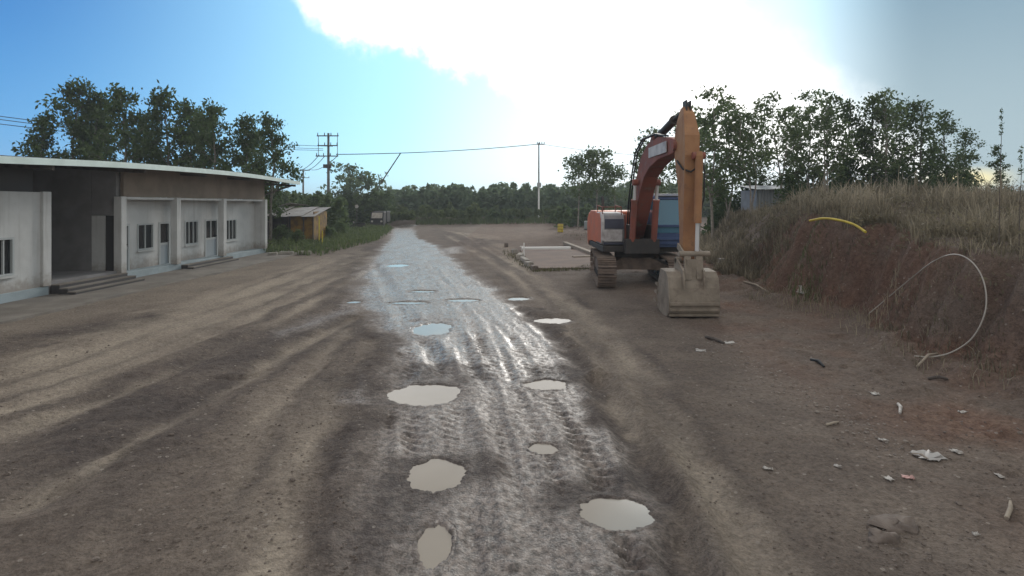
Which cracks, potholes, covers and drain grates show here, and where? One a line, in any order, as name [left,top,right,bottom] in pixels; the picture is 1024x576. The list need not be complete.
pothole [376,381,471,408]
pothole [519,377,572,391]
pothole [526,441,561,455]
pothole [408,321,457,337]
pothole [411,519,457,572]
pothole [570,493,662,534]
pothole [396,454,475,496]
